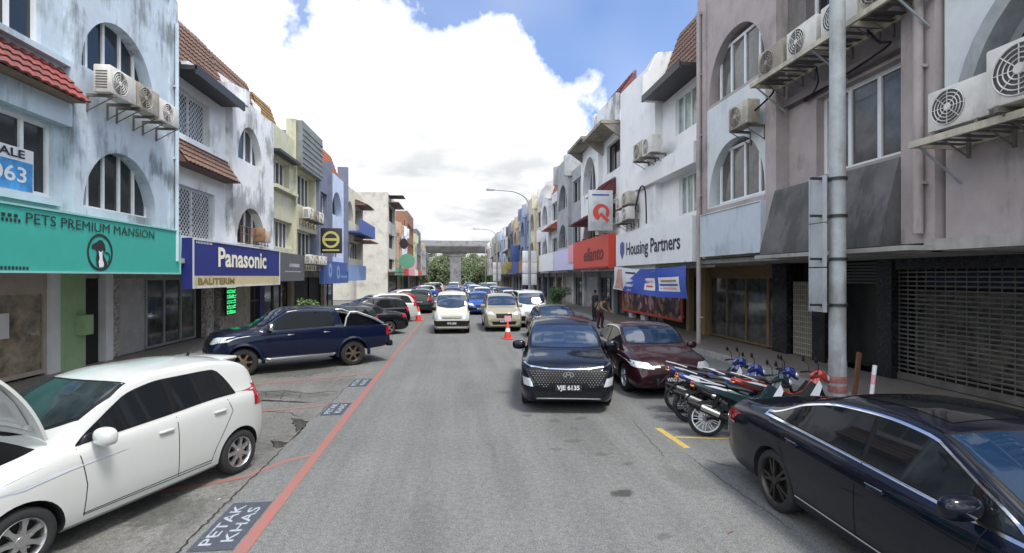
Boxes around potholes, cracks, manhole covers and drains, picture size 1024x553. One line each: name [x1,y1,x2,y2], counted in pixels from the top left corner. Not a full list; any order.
crack [687,454,792,530]
pothole [291,418,309,432]
crack [261,390,336,416]
